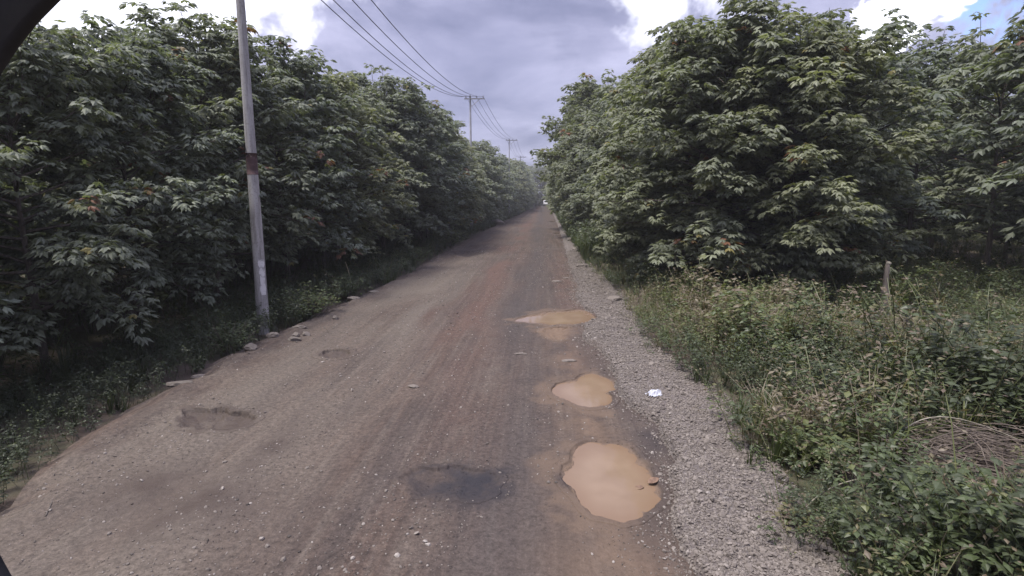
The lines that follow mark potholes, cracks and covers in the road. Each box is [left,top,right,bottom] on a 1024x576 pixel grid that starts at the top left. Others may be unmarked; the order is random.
pothole [551,436,672,529]
pothole [311,347,358,361]
pothole [543,370,621,411]
pothole [506,307,597,329]
pothole [166,404,265,434]
pothole [535,324,585,342]
